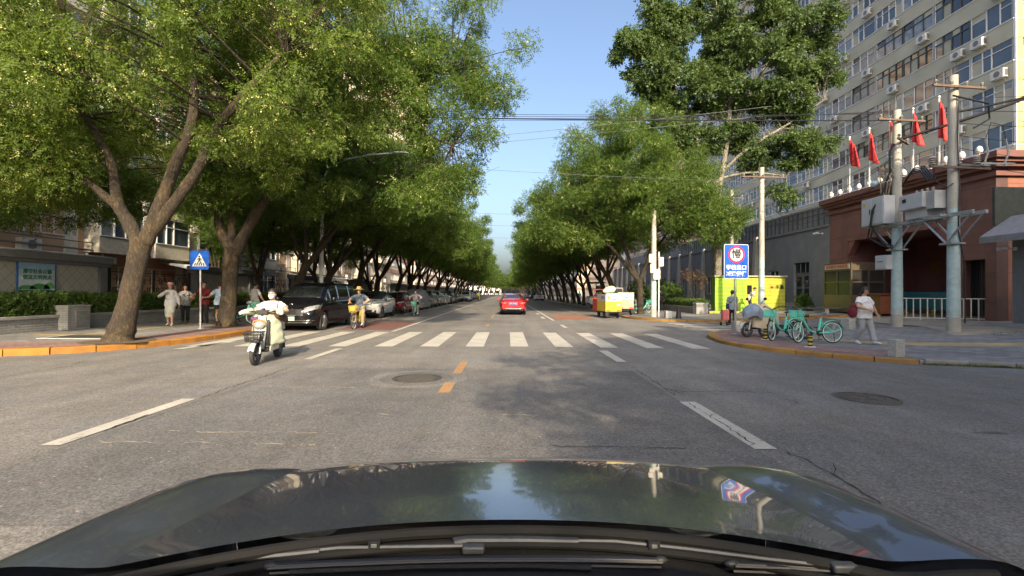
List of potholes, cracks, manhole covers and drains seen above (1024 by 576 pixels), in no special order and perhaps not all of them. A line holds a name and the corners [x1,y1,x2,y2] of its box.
manhole cover [831,392,905,405]
manhole cover [369,370,467,388]
crack [786,450,892,509]
